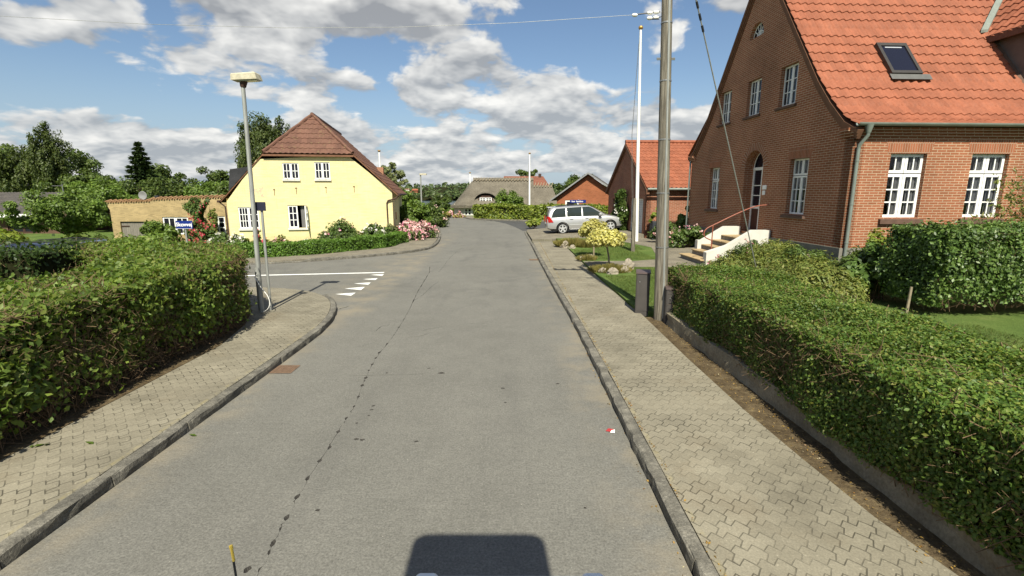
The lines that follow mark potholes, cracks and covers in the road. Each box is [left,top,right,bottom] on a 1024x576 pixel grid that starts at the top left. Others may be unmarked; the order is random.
crack [257,254,454,576]
